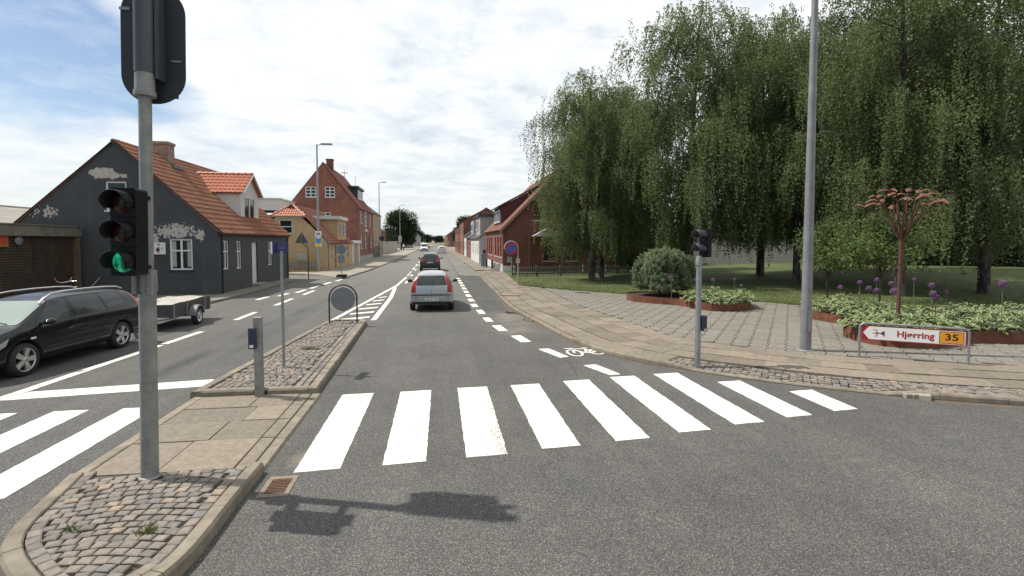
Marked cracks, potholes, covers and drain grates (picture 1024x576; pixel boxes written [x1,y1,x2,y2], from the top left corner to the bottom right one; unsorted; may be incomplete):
drain grate [256,475,299,498]
